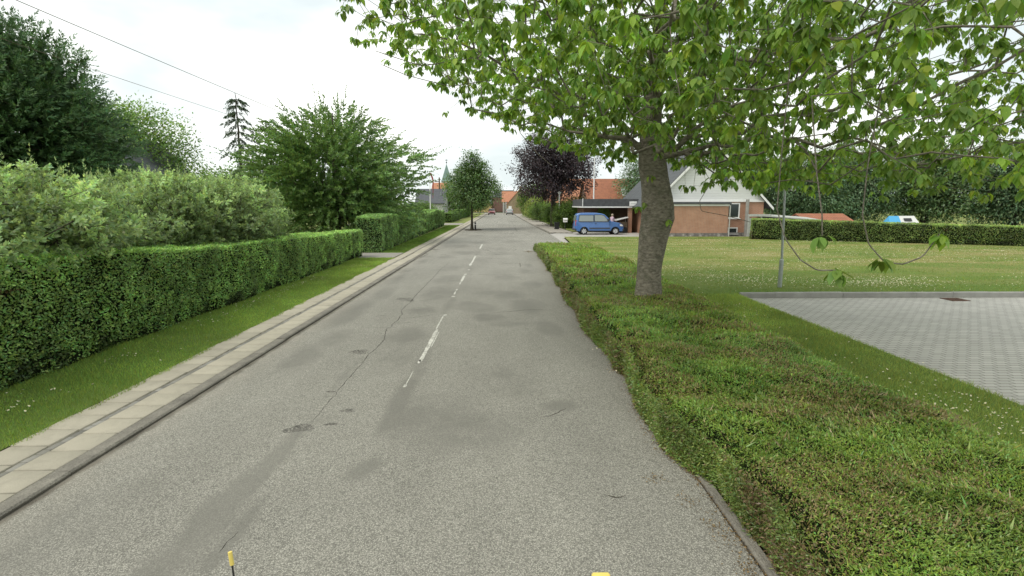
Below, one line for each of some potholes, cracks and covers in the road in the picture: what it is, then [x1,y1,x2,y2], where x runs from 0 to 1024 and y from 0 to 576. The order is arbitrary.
crack [314,254,447,419]
pothole [282,424,315,433]
